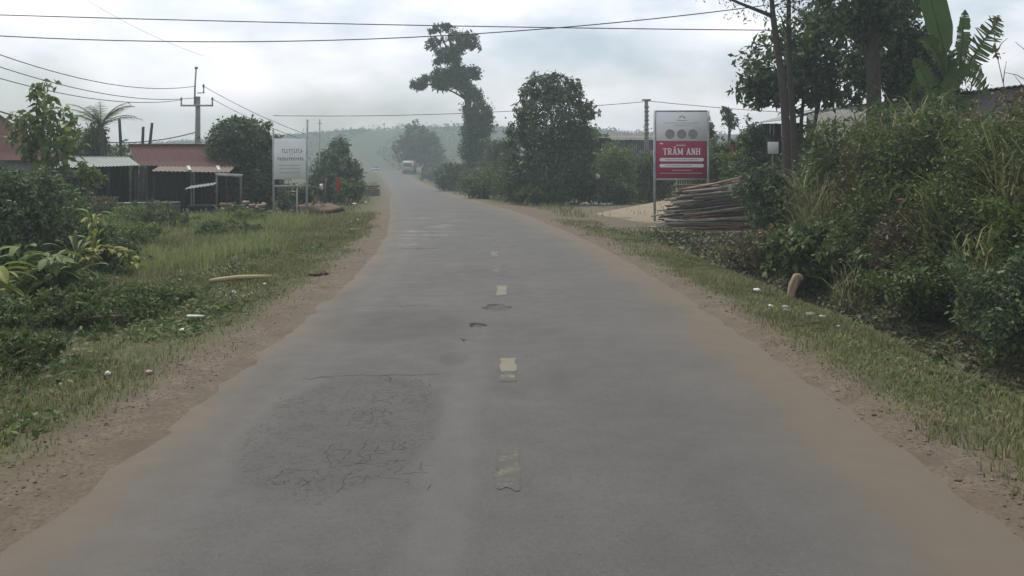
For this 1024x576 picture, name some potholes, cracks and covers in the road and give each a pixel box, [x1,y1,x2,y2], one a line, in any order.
crack [272,374,434,492]
pothole [482,304,513,312]
